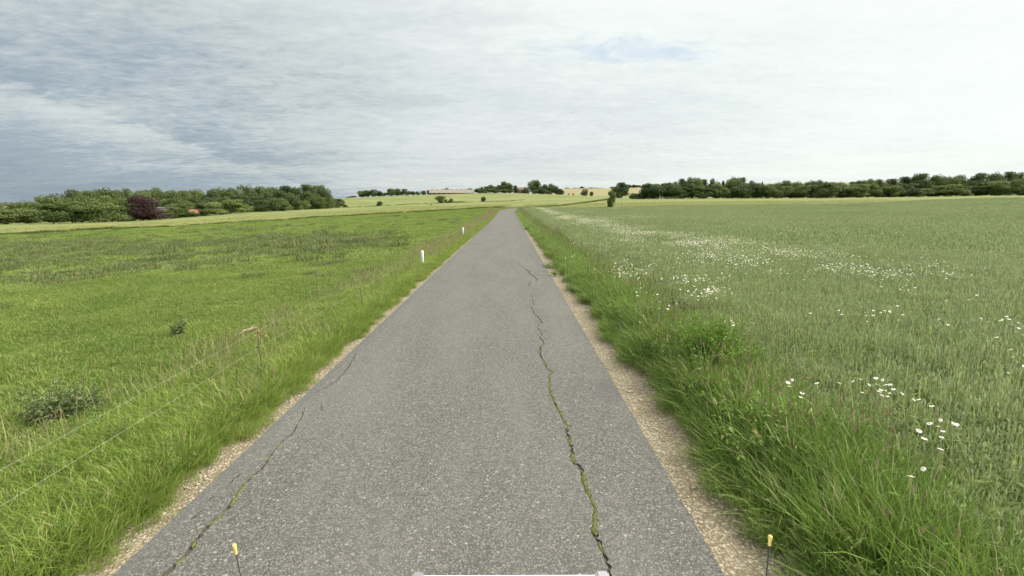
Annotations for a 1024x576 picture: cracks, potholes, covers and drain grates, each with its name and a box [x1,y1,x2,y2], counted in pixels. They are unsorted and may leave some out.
crack [519,262,612,576]
crack [162,354,356,576]
